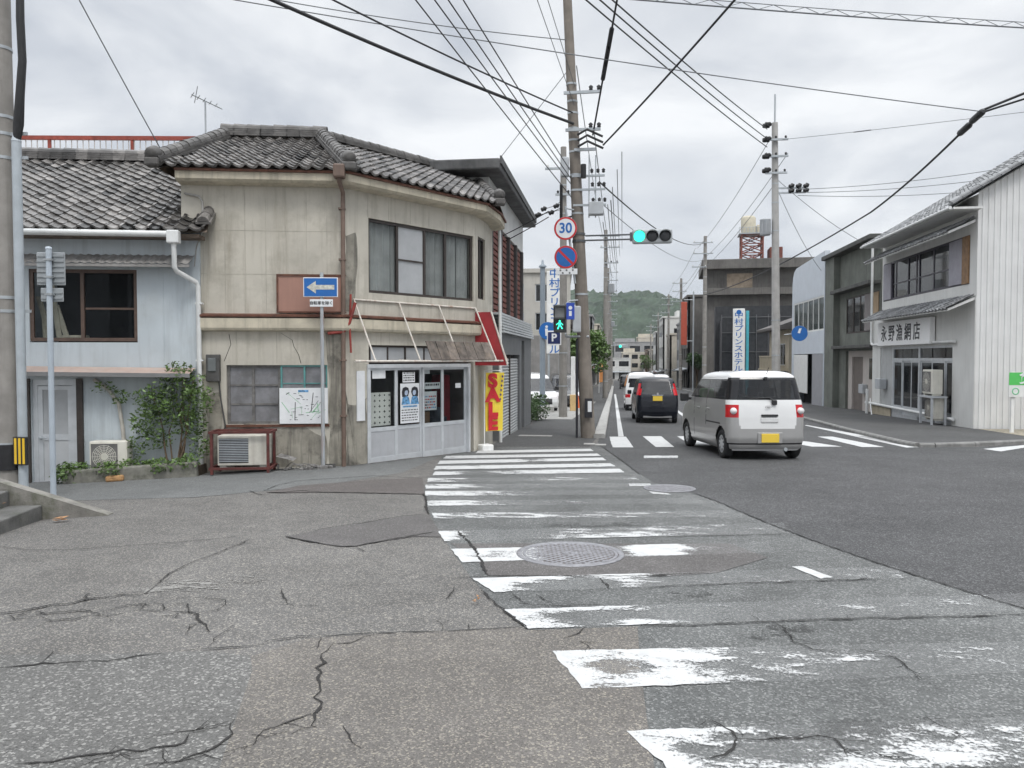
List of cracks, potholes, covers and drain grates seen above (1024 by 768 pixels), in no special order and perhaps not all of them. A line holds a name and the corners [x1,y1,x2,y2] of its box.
manhole cover [643,484,696,492]
crack [862,649,923,679]
crack [697,716,964,766]
manhole cover [516,541,624,567]
crack [776,624,837,653]
crack [0,530,610,768]
